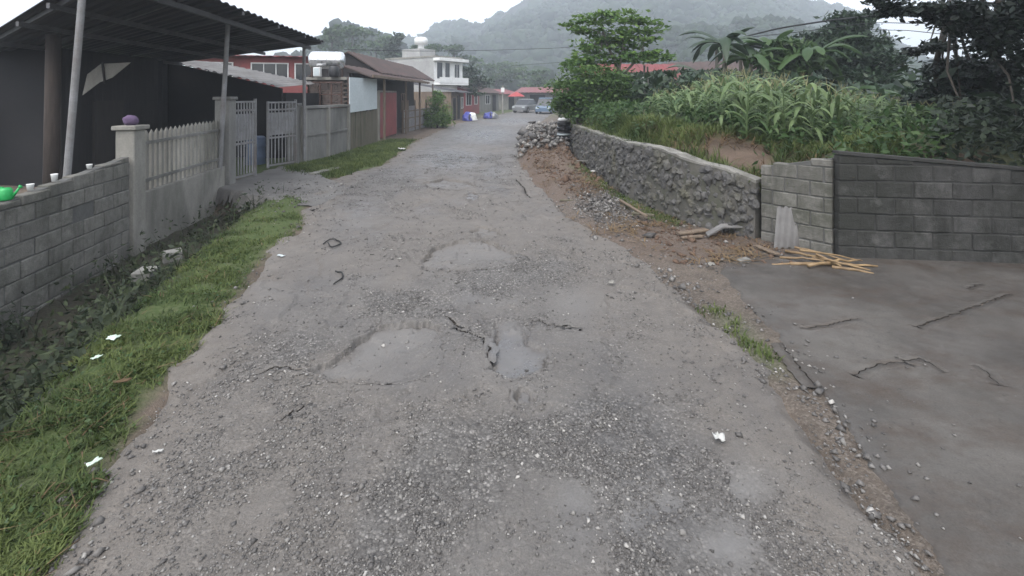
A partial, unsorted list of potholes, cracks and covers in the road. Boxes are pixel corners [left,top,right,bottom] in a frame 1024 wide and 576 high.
crack [527,317,587,332]
crack [252,363,305,380]
pothole [479,318,555,382]
crack [274,401,313,423]
crack [770,316,1013,390]
crack [908,282,1019,330]
crack [439,315,499,363]
